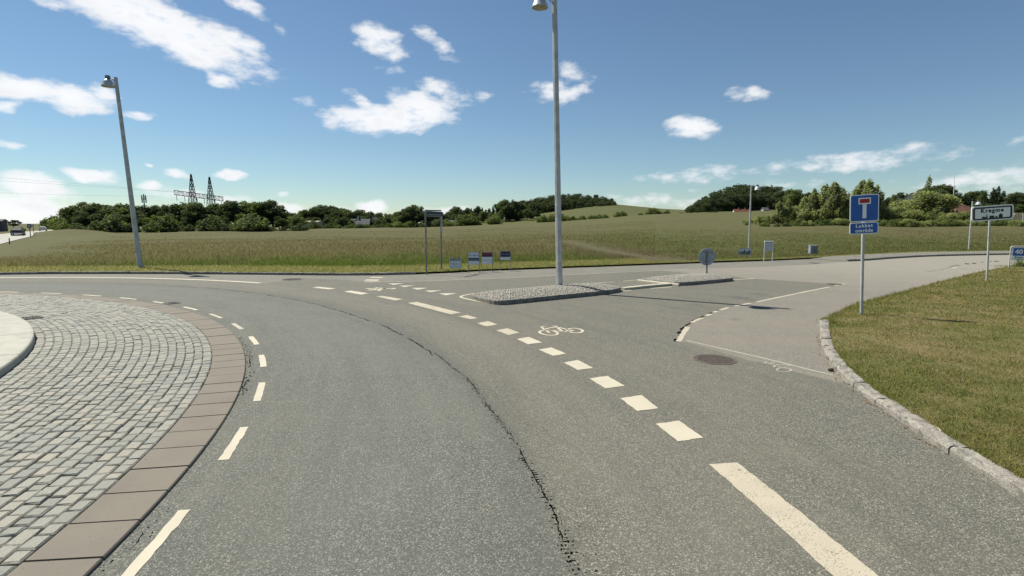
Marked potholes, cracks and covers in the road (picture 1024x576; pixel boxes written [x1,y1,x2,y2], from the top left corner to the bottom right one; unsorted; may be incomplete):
manhole cover [693,354,737,365]
crack [102,286,717,575]
